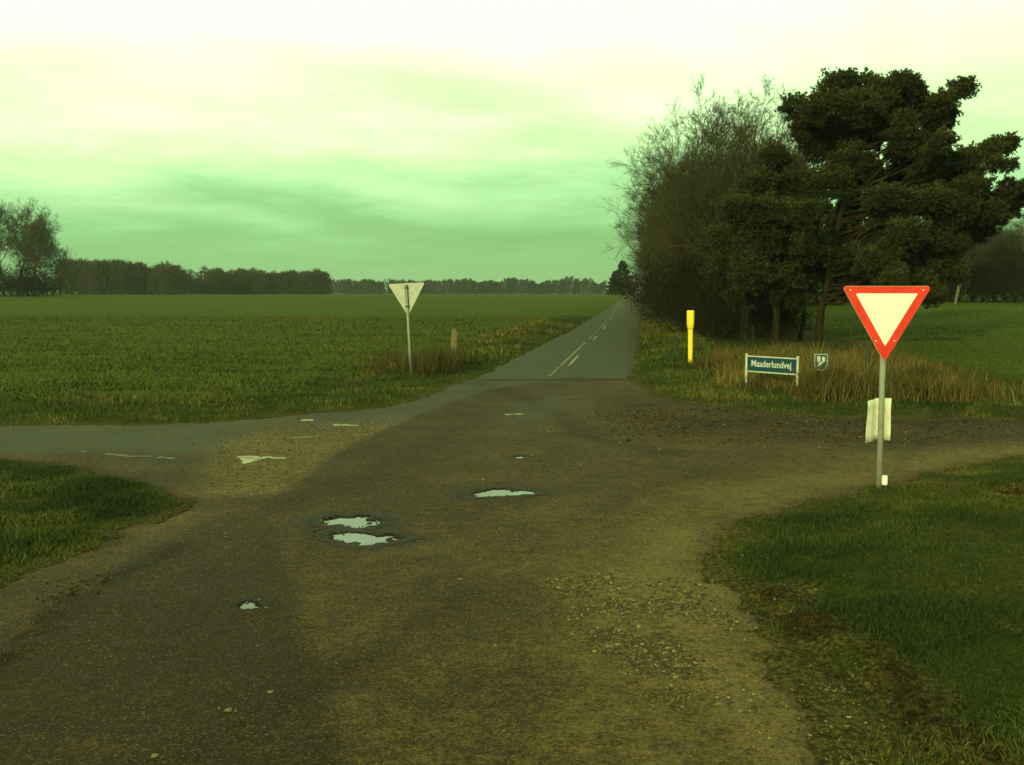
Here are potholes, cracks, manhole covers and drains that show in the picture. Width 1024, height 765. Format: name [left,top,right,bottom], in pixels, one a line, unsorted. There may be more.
pothole [304,511,398,533]
pothole [312,528,424,550]
pothole [456,486,548,499]
